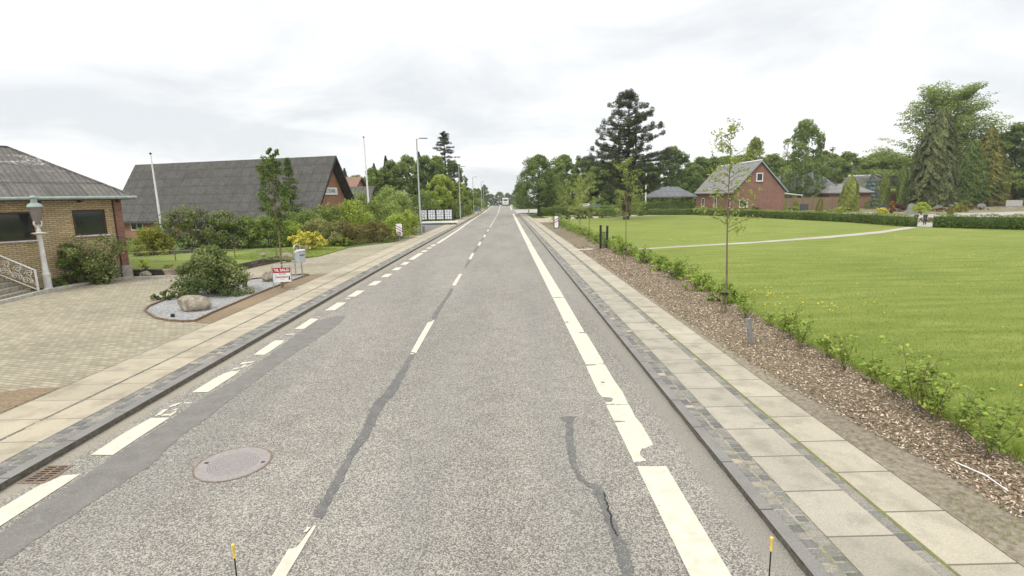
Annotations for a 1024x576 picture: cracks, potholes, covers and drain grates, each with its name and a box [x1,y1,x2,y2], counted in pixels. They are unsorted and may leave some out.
drain grate [17,465,74,484]
manhole cover [192,447,273,482]
